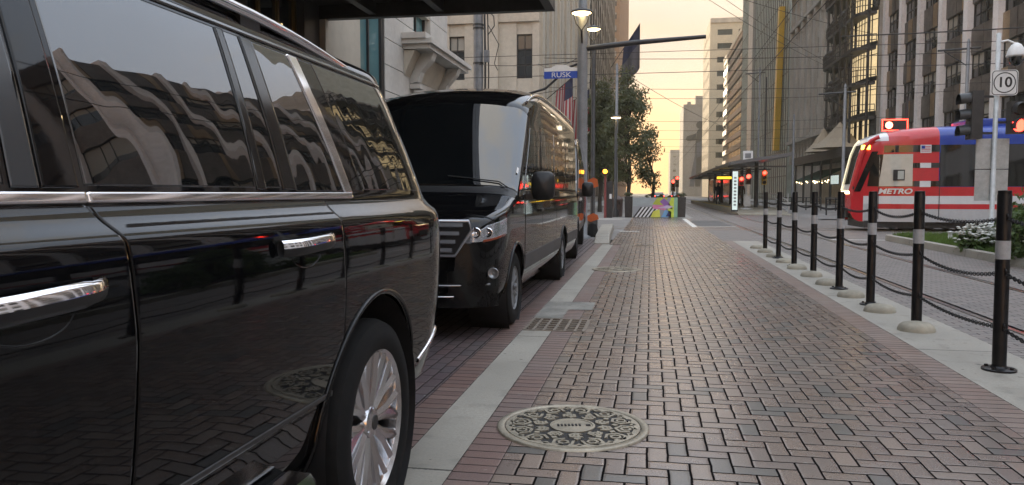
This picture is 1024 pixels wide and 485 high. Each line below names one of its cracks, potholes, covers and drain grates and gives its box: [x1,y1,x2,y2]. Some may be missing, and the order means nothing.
drain grate [522,318,591,332]
manhole cover [497,404,649,452]
